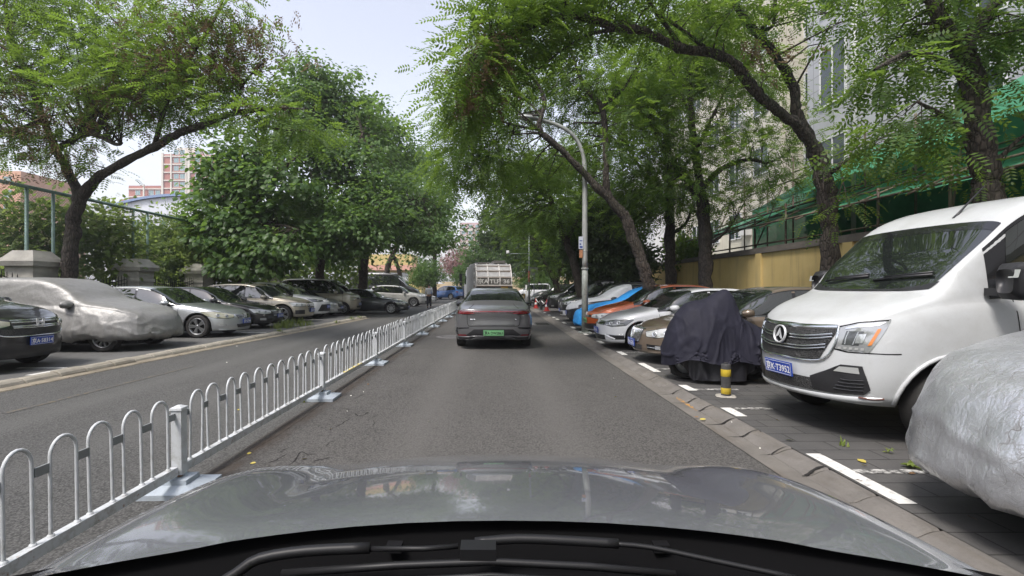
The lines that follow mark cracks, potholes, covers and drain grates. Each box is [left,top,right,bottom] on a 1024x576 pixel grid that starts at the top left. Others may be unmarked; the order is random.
crack [269,387,377,465]
